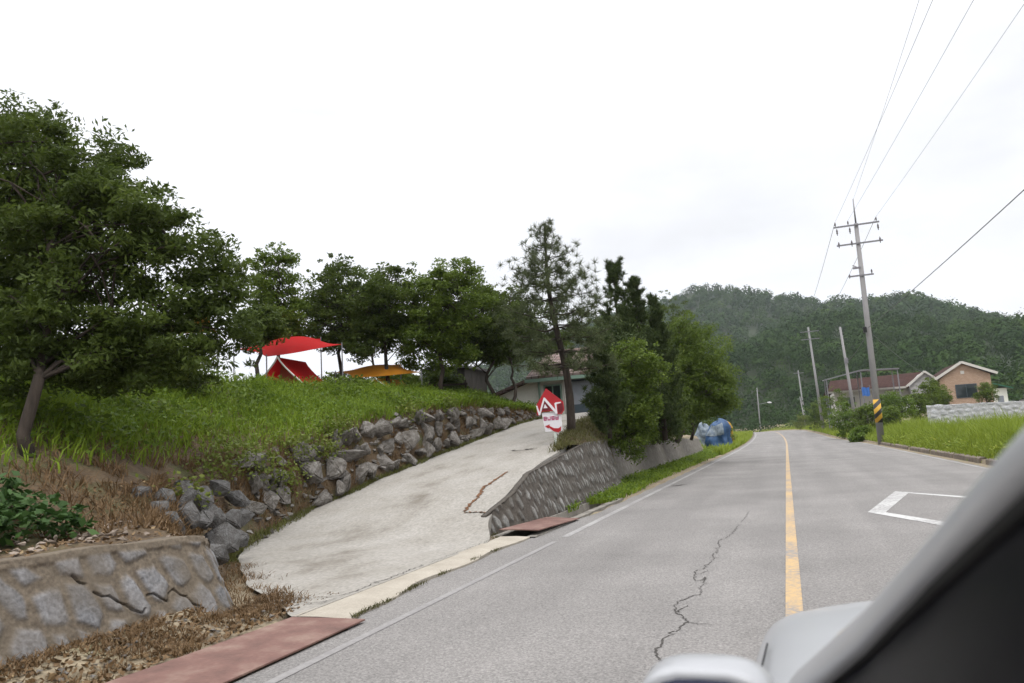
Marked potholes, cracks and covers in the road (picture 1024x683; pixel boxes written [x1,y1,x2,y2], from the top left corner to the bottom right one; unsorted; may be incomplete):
crack [650,514,747,670]
crack [463,471,508,513]
